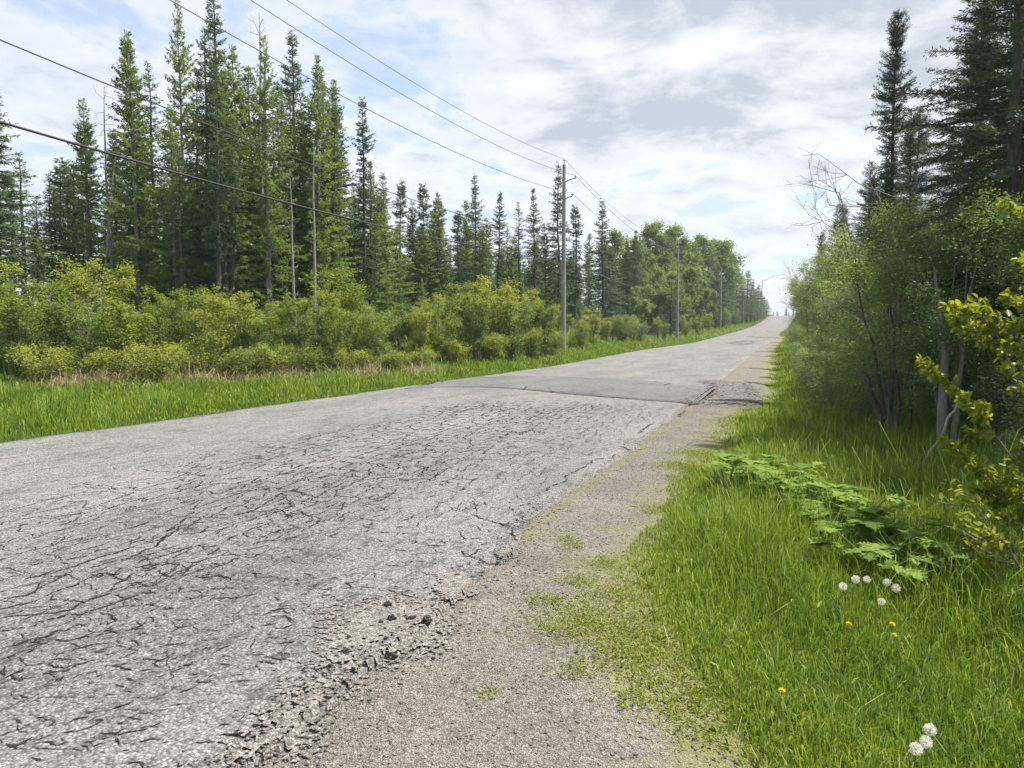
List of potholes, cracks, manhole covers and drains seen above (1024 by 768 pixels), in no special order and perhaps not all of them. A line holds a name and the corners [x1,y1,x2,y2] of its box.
crack [0,400,664,768]
